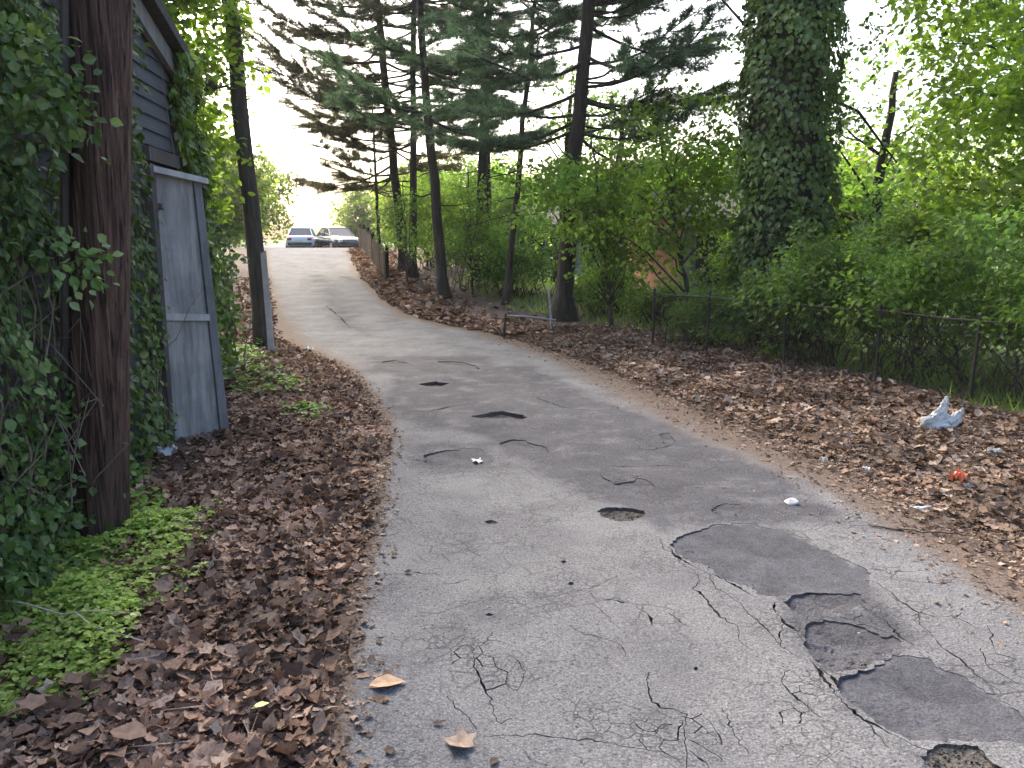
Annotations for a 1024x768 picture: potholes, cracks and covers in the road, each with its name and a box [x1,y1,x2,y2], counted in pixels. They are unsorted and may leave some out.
crack [842,569,1021,693]
pothole [472,411,527,420]
pothole [597,507,645,521]
crack [515,539,928,751]
crack [447,632,749,768]
pothole [920,744,997,768]
crack [598,445,672,483]
